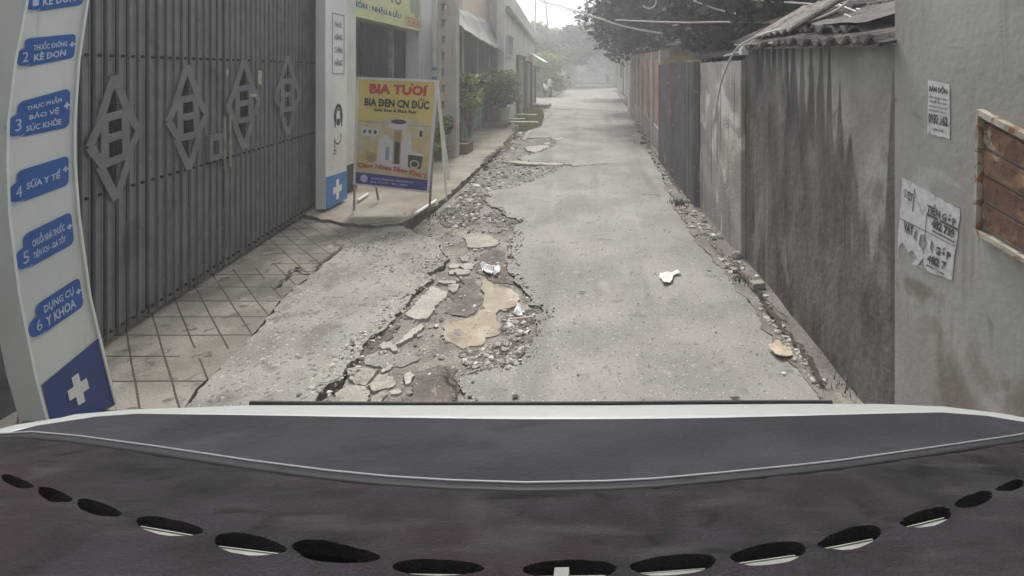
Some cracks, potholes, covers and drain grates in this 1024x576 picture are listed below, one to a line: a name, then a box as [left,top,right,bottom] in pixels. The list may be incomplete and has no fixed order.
pothole [460,337,533,371]
pothole [474,250,513,284]
pothole [441,192,488,228]
pothole [464,160,558,193]
pothole [401,365,460,402]
pothole [500,308,543,336]
pothole [363,304,414,359]
pothole [448,278,484,317]
